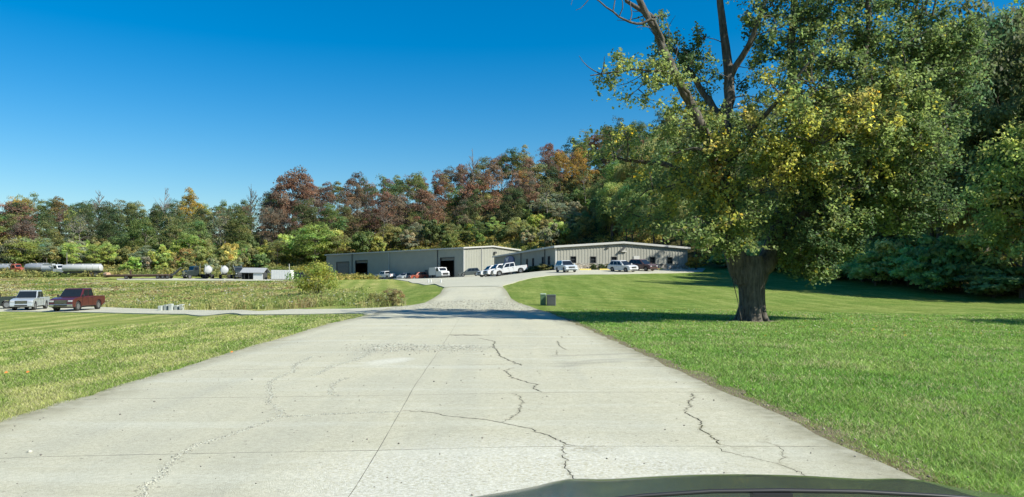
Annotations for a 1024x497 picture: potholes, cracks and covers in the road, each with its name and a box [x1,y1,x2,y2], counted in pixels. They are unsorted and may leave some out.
crack [422,338,574,479]
crack [135,350,401,497]
crack [684,393,805,476]
